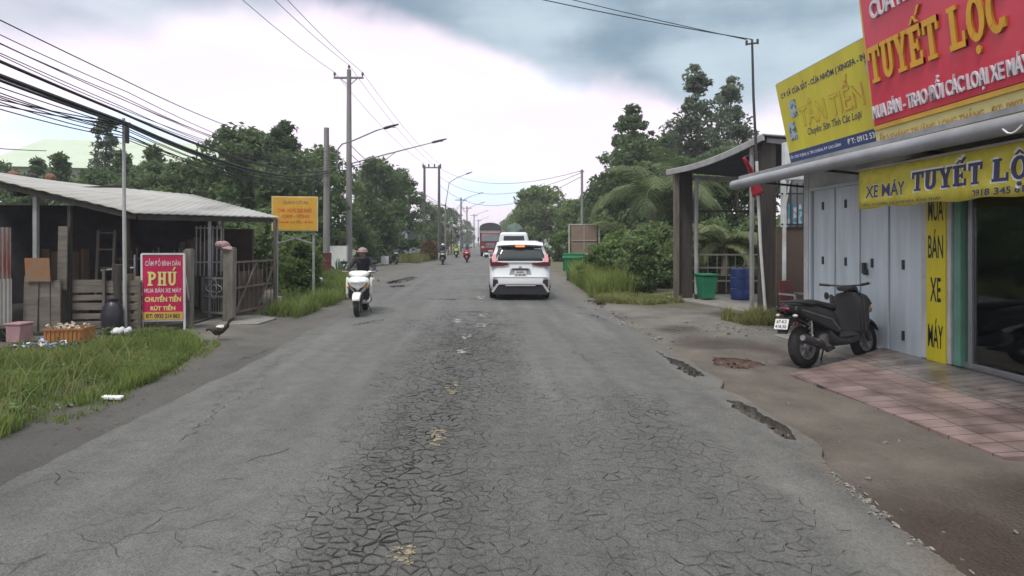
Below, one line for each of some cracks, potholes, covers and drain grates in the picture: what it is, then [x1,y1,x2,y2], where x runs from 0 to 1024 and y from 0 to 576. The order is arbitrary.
crack [0,499,233,574]
pothole [726,400,796,440]
crack [179,343,310,441]
pothole [656,351,705,377]
pothole [712,357,766,369]
crack [211,311,642,576]
crack [530,372,863,576]
